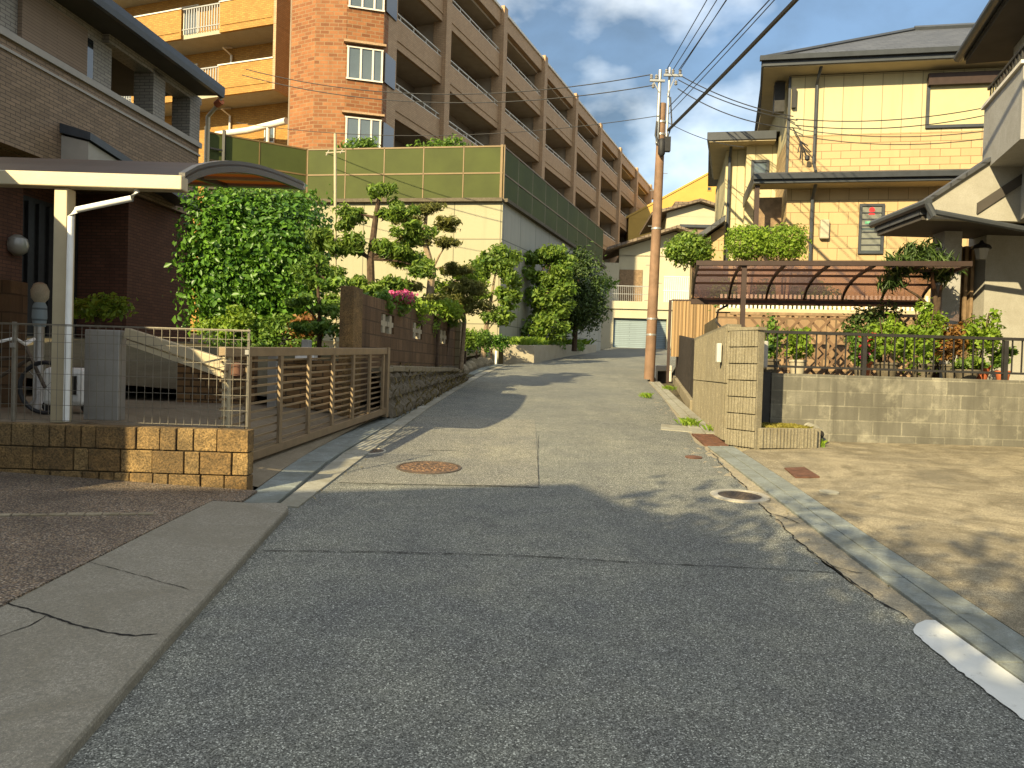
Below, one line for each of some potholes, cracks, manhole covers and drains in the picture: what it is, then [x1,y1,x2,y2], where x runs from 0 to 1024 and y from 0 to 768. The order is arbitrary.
utility cover [784,467,820,478]
crack [0,602,151,636]
drain grate [692,433,729,446]
manhole cover [710,489,770,504]
manhole cover [396,461,461,474]
